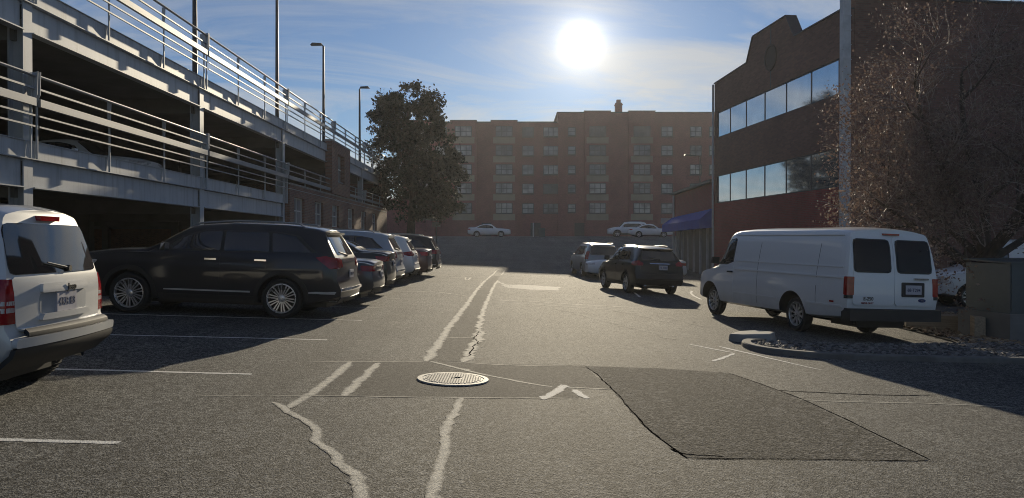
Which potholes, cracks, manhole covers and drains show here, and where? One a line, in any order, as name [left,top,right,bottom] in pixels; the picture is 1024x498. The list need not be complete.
crack [413,271,642,389]
manhole cover [417,372,489,386]
